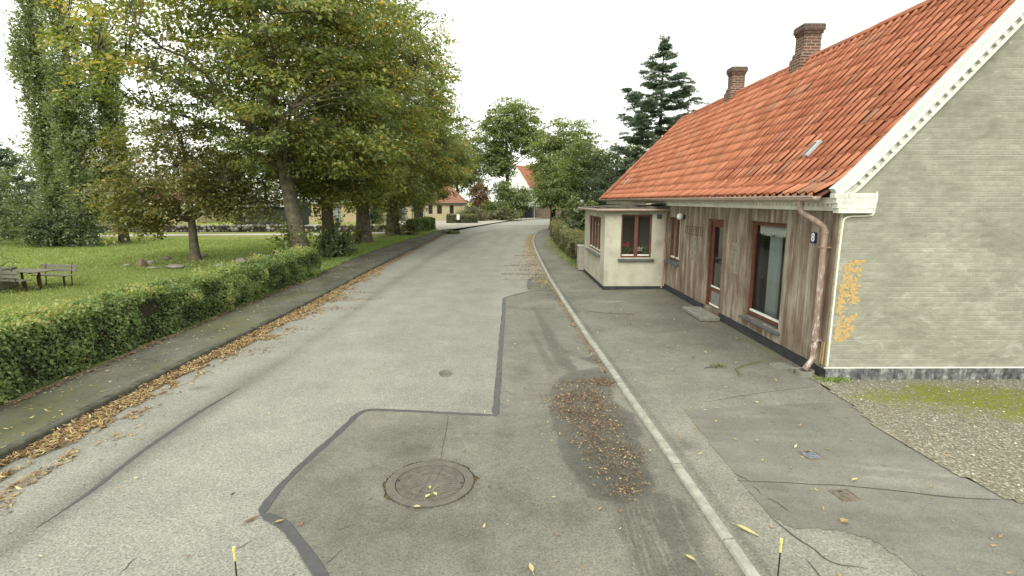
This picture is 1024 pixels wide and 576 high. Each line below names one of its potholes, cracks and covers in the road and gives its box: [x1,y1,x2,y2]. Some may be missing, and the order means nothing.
utility cover [828,488,862,502]
utility cover [797,450,826,460]
crack [735,473,982,576]
manhole cover [382,460,479,509]
